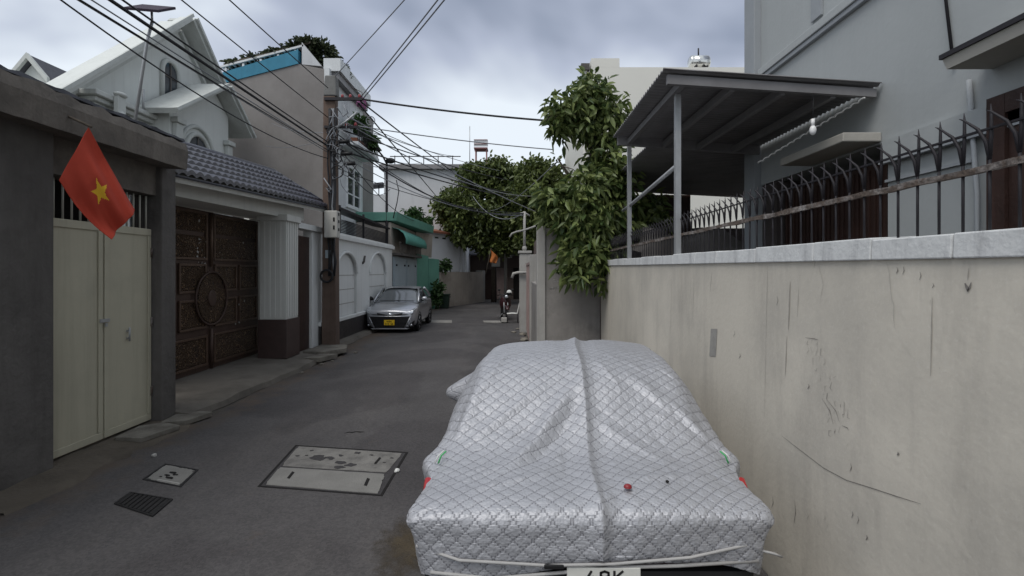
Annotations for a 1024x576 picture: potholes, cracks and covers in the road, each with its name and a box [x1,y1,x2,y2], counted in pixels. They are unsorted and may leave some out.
manhole cover [266,467,384,494]
drain grate [114,492,173,517]
manhole cover [283,446,402,473]
manhole cover [142,463,199,487]
